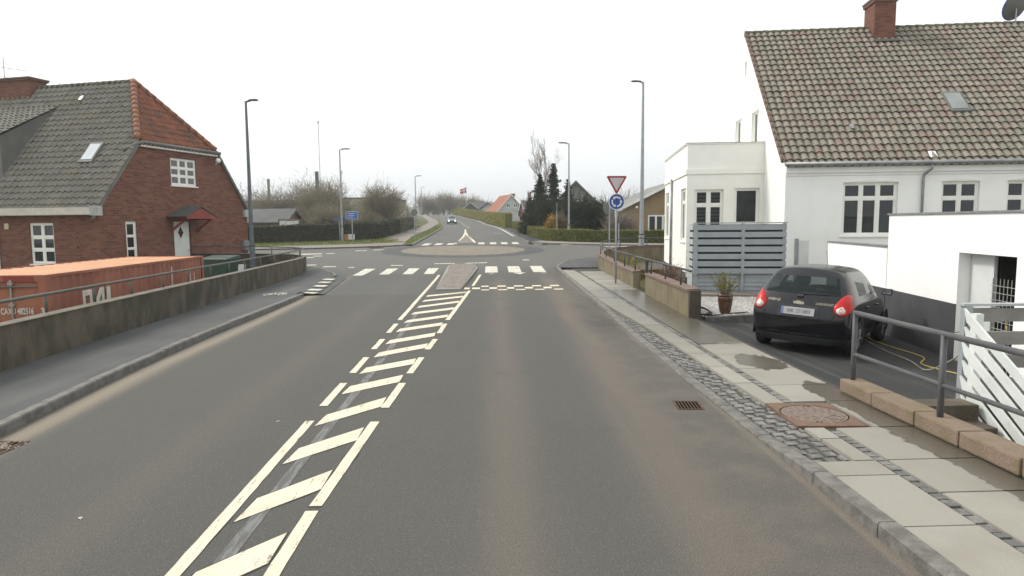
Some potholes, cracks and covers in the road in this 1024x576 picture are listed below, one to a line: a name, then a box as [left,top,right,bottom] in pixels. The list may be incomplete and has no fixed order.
drain grate [673,401,705,410]
manhole cover [766,403,867,430]
